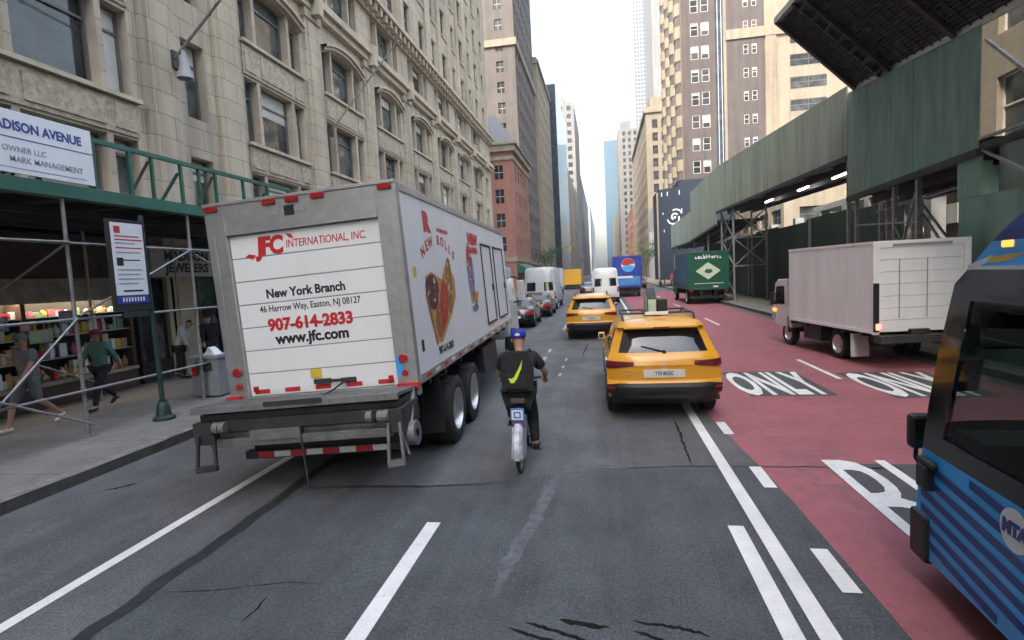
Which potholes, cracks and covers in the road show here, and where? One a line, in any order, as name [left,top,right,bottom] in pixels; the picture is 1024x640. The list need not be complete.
crack [182,582,308,622]
crack [508,619,709,640]
